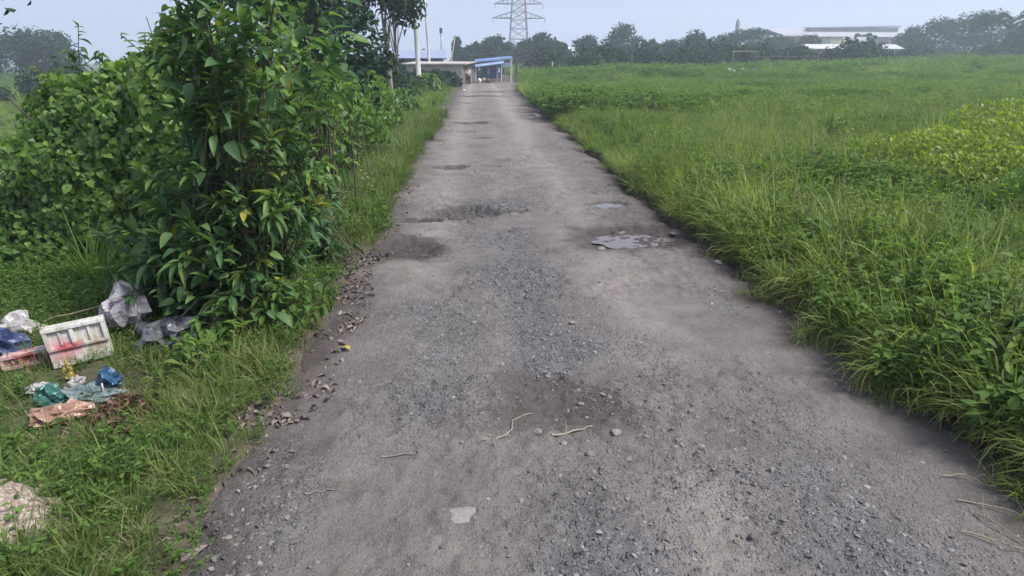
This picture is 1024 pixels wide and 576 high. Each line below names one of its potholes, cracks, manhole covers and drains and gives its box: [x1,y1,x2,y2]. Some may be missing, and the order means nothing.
pothole [423,204,505,221]
pothole [564,221,700,251]
pothole [583,201,632,209]
